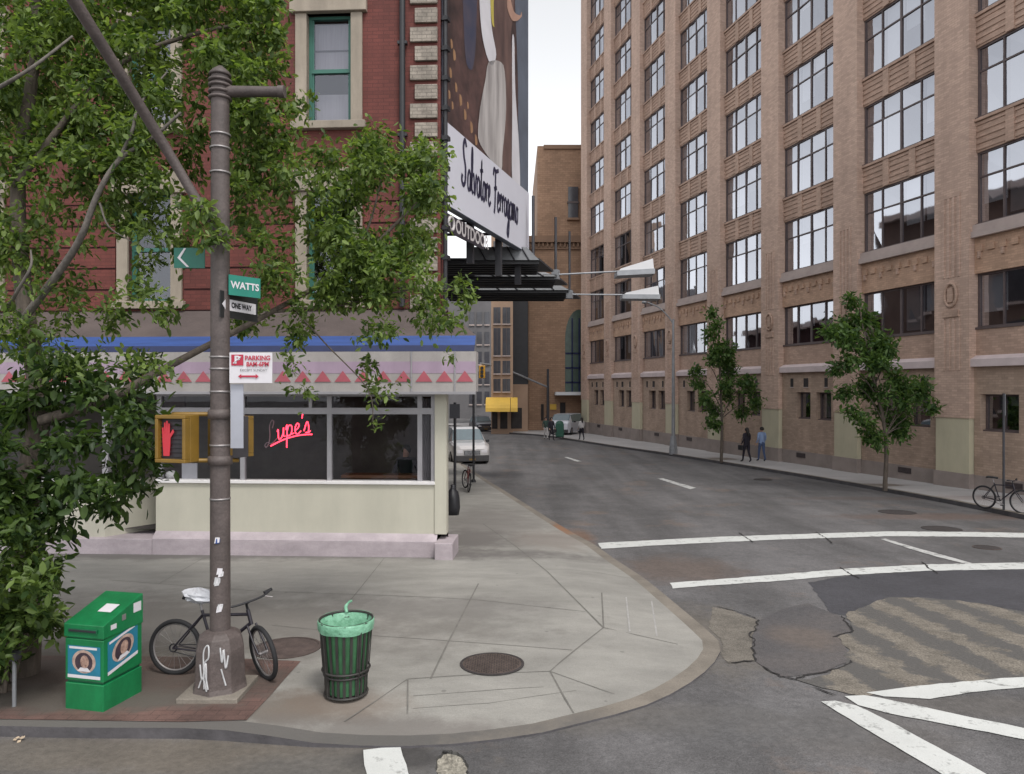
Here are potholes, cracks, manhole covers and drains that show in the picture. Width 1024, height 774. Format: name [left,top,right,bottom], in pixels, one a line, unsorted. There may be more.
pothole [435,750,469,774]
manhole cover [255,637,321,659]
crack [718,606,852,695]
manhole cover [460,652,524,675]
